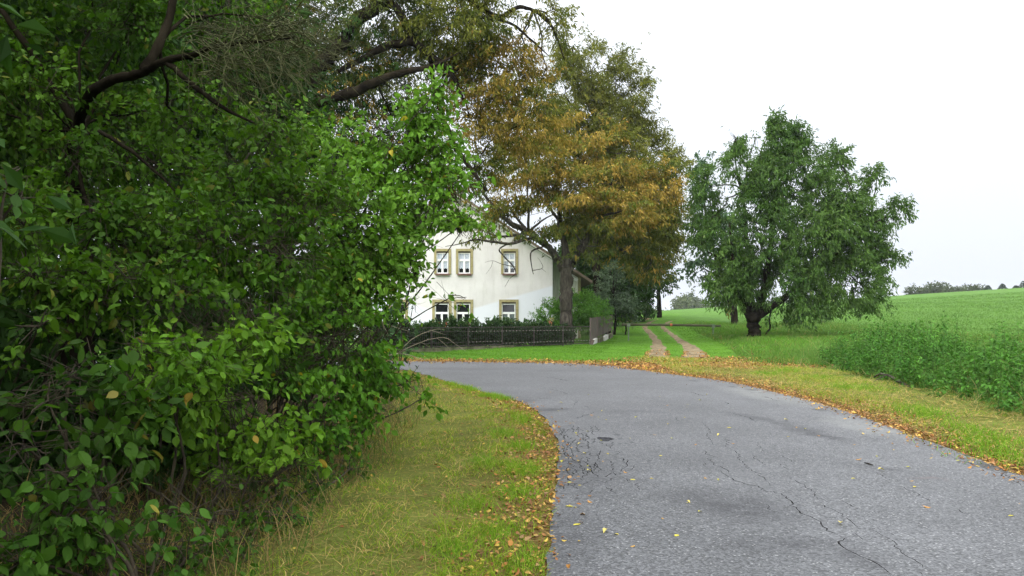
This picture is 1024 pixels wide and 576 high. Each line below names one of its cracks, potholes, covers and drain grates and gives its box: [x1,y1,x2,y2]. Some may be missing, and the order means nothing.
crack [542,377,639,494]
crack [703,423,923,575]
